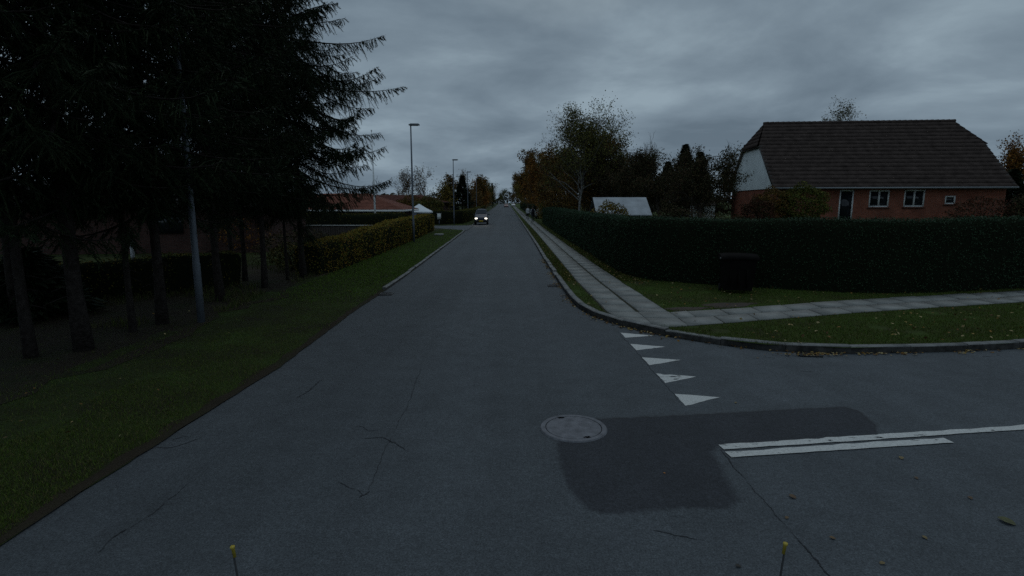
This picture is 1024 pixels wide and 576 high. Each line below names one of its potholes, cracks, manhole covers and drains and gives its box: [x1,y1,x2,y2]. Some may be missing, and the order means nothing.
manhole cover [540,415,607,443]
crack [98,484,187,553]
